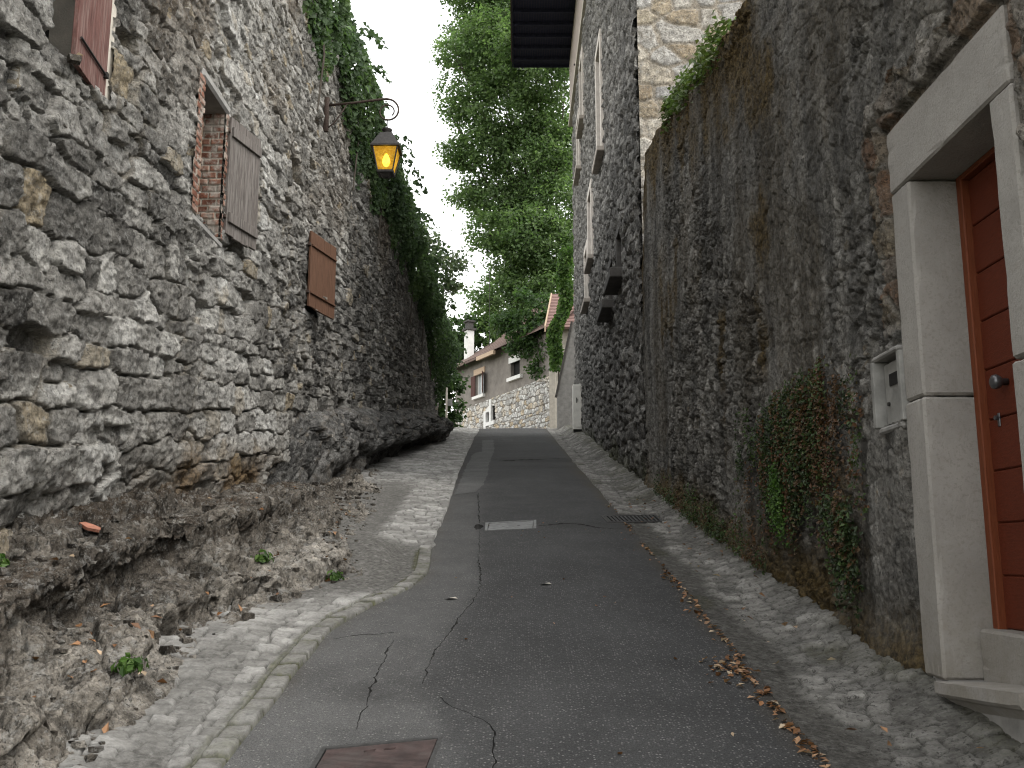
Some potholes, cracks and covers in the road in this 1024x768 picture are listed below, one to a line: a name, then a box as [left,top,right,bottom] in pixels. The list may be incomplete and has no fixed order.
manhole cover [485,520,536,531]
crack [440,697,497,768]
manhole cover [310,736,443,768]
crack [335,632,394,729]
drain grate [601,514,663,524]
